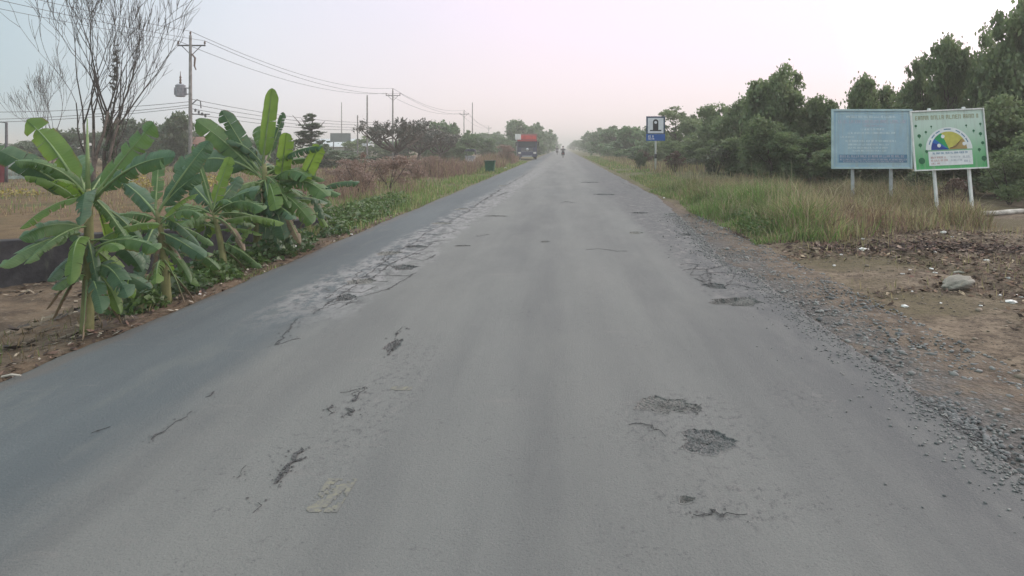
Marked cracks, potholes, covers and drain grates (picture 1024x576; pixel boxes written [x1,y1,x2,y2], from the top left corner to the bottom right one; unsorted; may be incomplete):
crack [629,404,701,438]
pothole [632,395,703,415]
pothole [679,428,739,457]
crack [685,500,759,522]
pothole [382,338,404,353]
crack [233,447,309,512]
pothole [677,495,697,505]
crack [311,215,461,314]
pothole [707,297,764,307]
crack [323,383,376,418]
crack [680,260,755,289]
